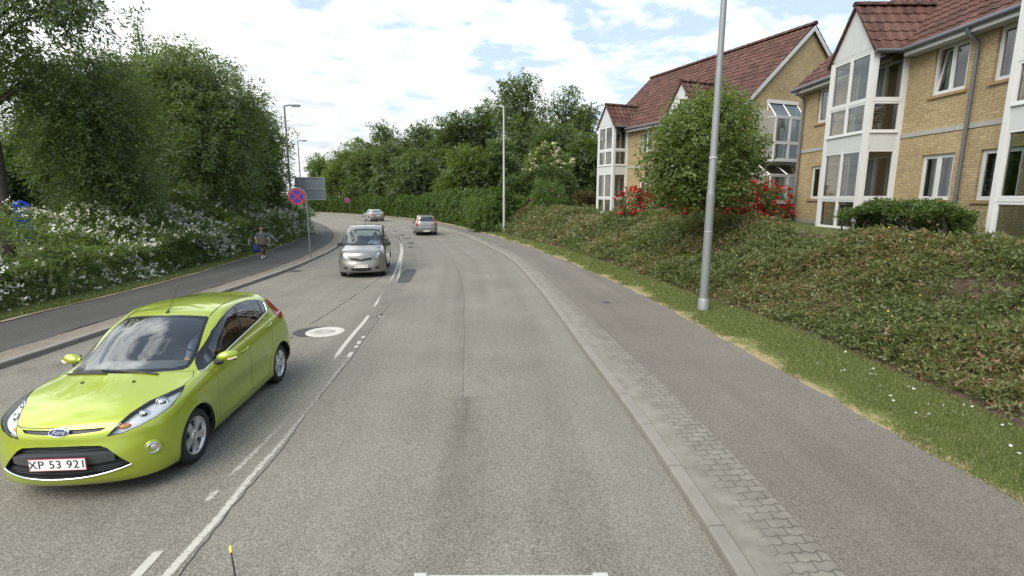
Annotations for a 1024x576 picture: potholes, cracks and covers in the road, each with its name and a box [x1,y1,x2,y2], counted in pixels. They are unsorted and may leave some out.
manhole cover [305,327,345,337]
